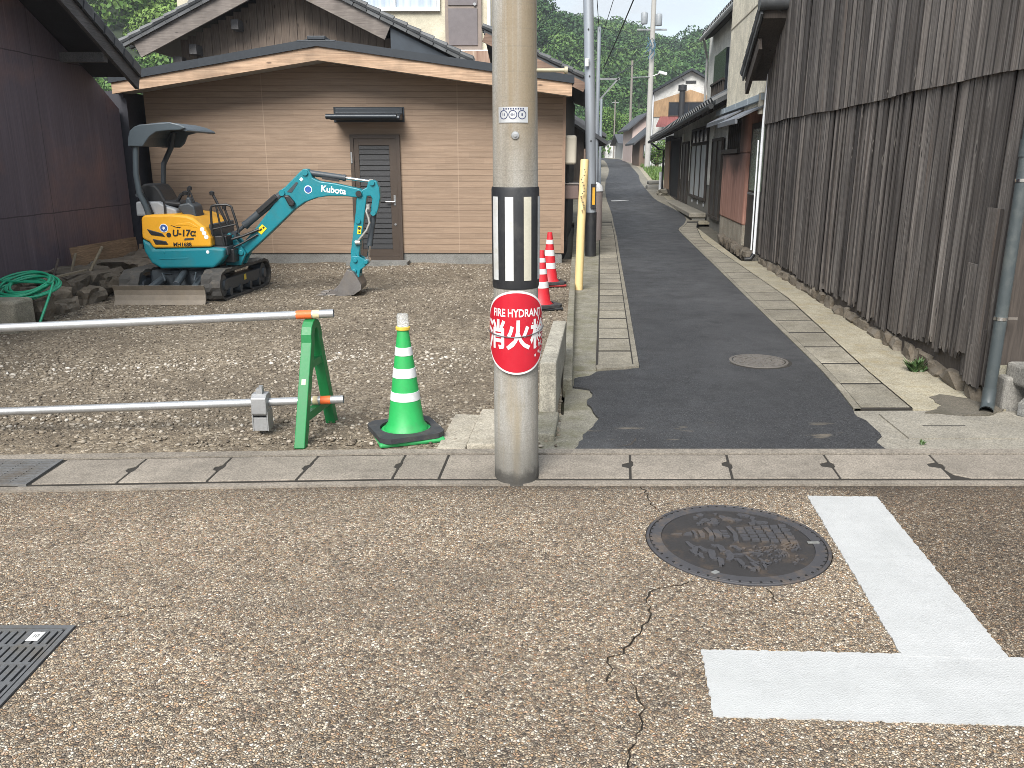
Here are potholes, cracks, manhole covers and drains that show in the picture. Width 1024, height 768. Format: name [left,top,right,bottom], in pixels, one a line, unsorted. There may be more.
manhole cover [646,505,832,587]
crack [606,583,685,768]
drain grate [0,459,64,487]
manhole cover [729,354,792,369]
drain grate [0,625,76,709]
